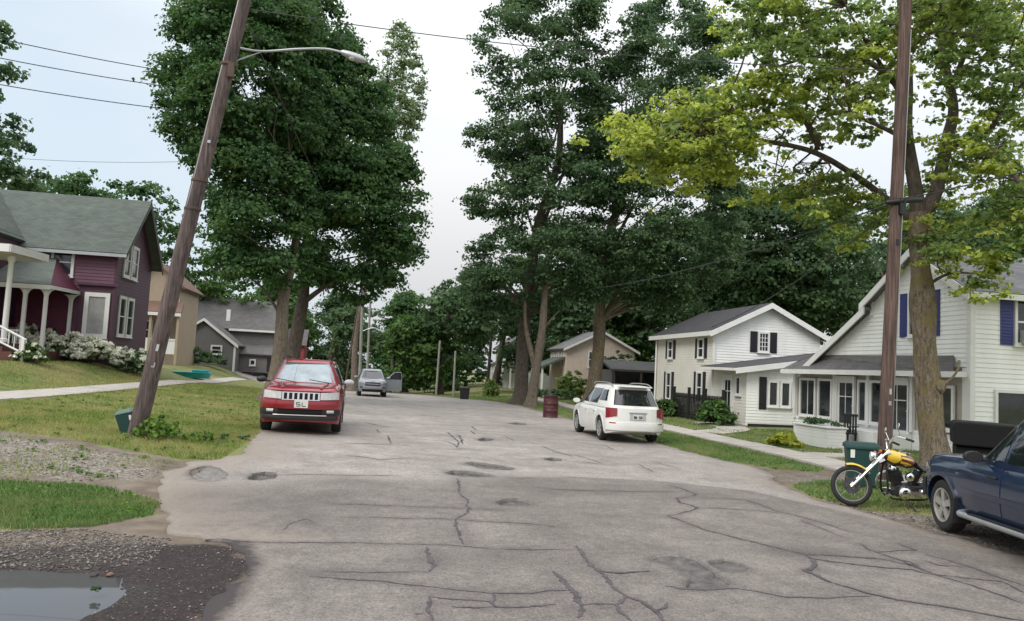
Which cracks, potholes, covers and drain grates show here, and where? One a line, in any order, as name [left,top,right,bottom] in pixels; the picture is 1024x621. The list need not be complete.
pothole [189,465,229,481]
crack [290,415,514,476]
crack [860,543,1024,603]
pothole [466,462,515,470]
pothole [248,472,278,480]
crack [194,478,853,620]
